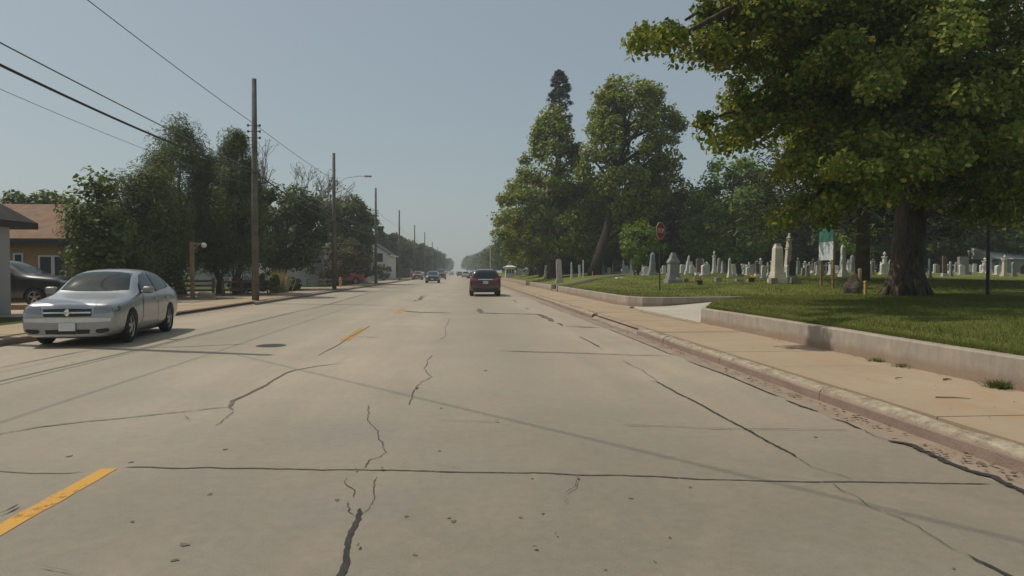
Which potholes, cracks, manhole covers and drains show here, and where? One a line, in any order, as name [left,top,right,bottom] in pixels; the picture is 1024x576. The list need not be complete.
crack [344,405,406,515]
crack [799,458,962,552]
